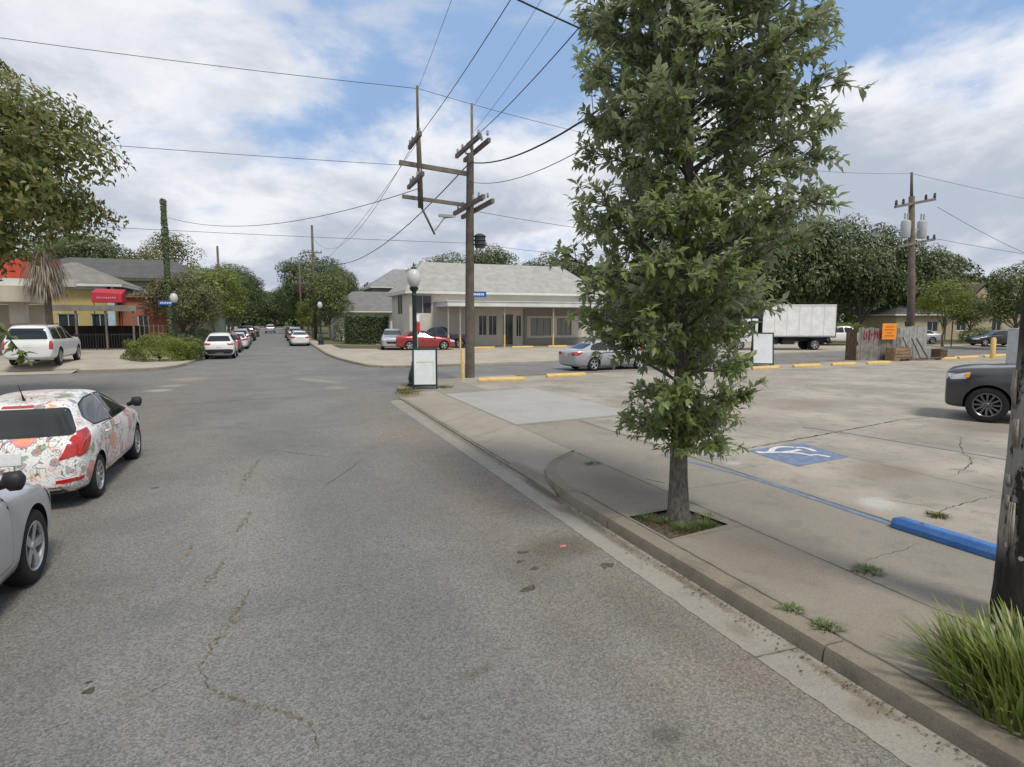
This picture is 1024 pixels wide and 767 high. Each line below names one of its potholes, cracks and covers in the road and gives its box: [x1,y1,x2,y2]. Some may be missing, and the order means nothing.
crack [18,589,320,750]
crack [890,496,991,519]
crack [944,437,972,478]
